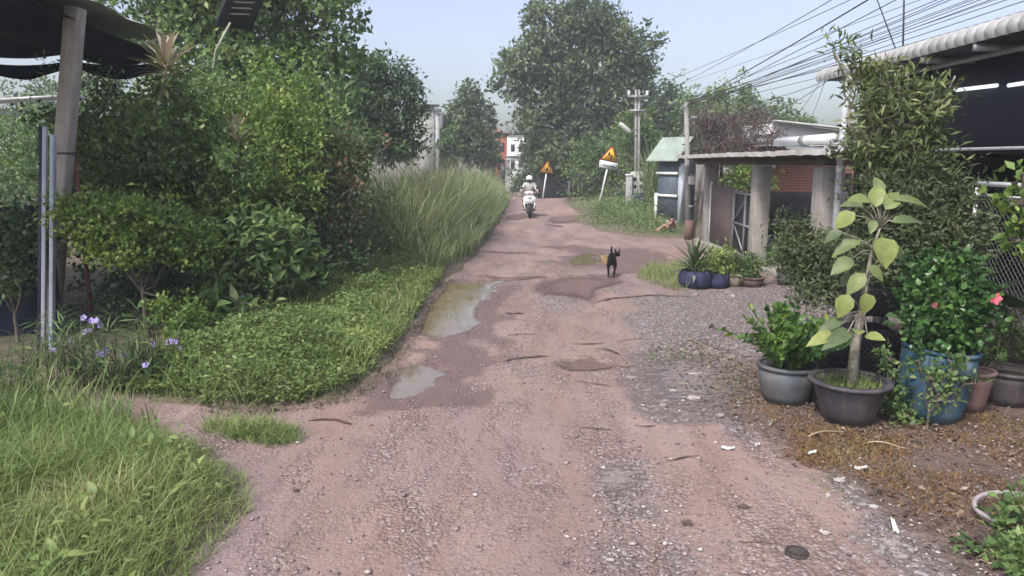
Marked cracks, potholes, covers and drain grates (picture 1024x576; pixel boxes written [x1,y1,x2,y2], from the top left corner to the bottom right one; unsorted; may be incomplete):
pothole [539,274,621,300]
pothole [389,361,448,399]
manhole cover [784,545,809,560]
pothole [561,355,616,371]
pothole [415,279,505,338]
pothole [570,253,598,266]
crack [591,294,681,304]
crack [577,338,647,354]
